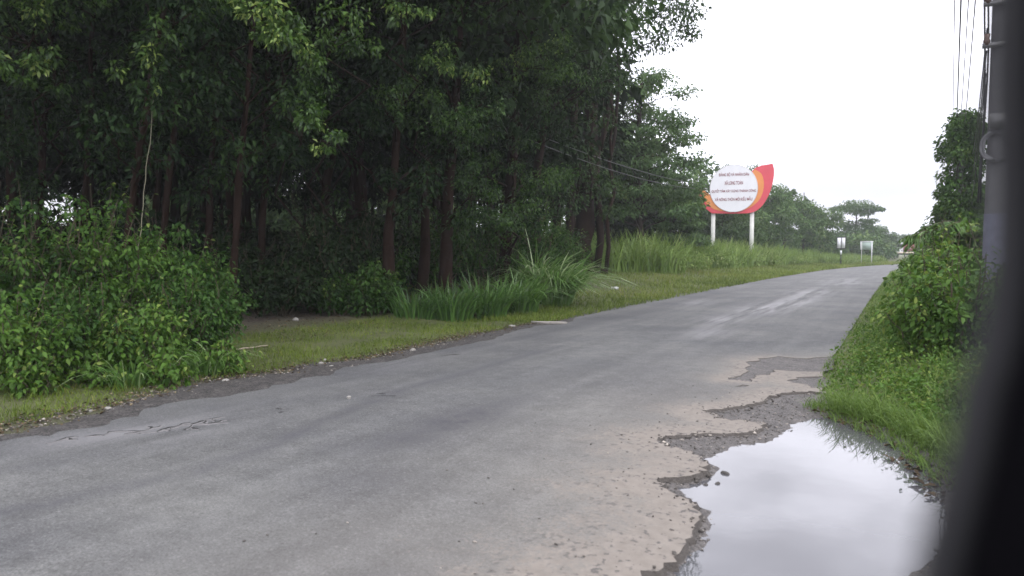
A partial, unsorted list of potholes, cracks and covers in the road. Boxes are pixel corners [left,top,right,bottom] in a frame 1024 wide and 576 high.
pothole [728,356,834,382]
pothole [640,391,941,576]
pothole [787,376,832,388]
crack [46,417,229,444]
